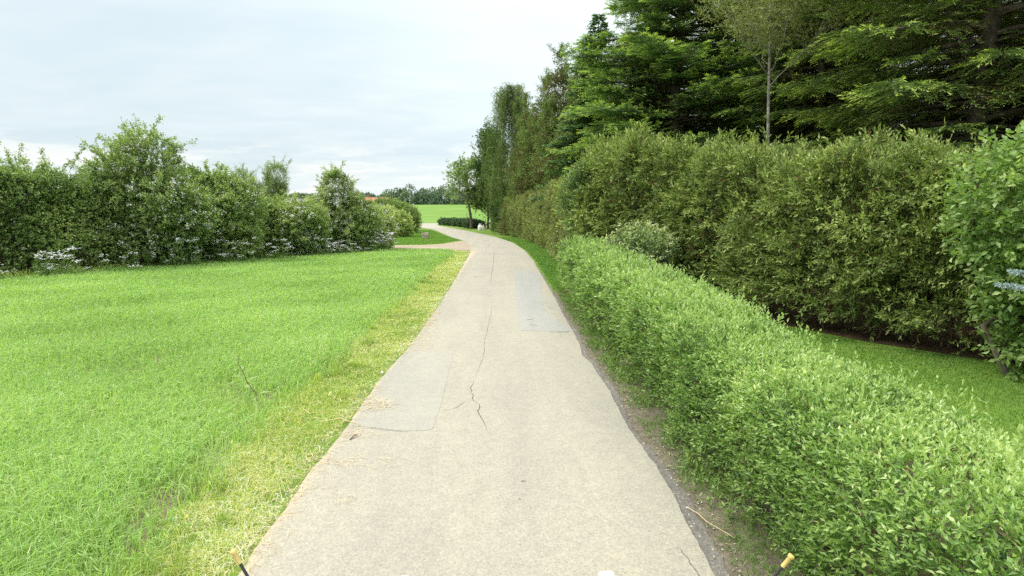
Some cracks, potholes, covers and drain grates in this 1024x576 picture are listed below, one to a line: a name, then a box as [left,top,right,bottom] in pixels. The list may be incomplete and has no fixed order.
crack [449,310,492,429]
